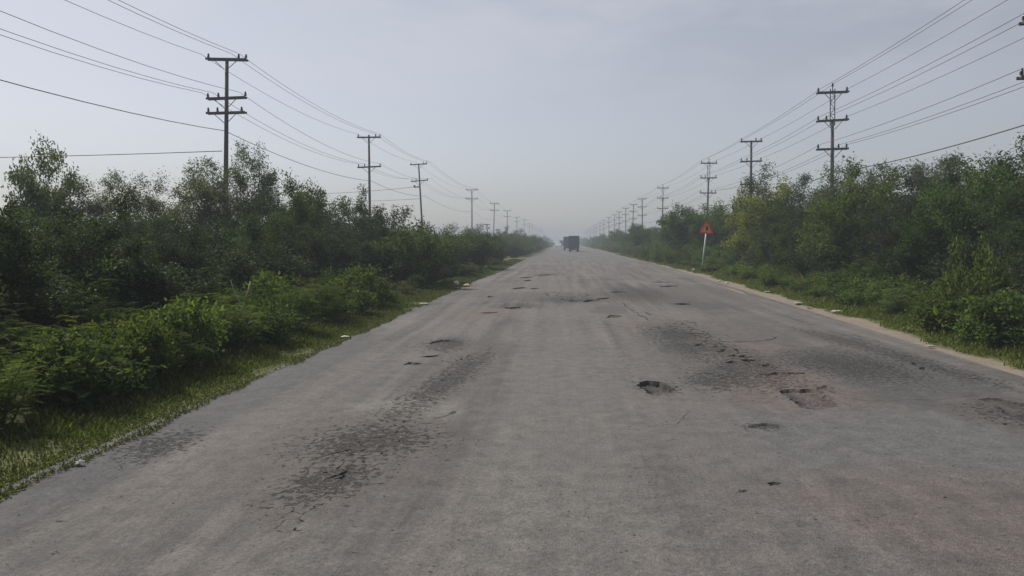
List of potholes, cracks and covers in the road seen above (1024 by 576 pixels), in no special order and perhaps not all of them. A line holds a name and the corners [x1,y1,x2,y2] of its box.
pothole [816,385,844,394]
pothole [978,398,1024,415]
pothole [780,389,839,410]
pothole [636,381,677,395]
crack [274,420,418,533]
crack [623,303,783,390]
